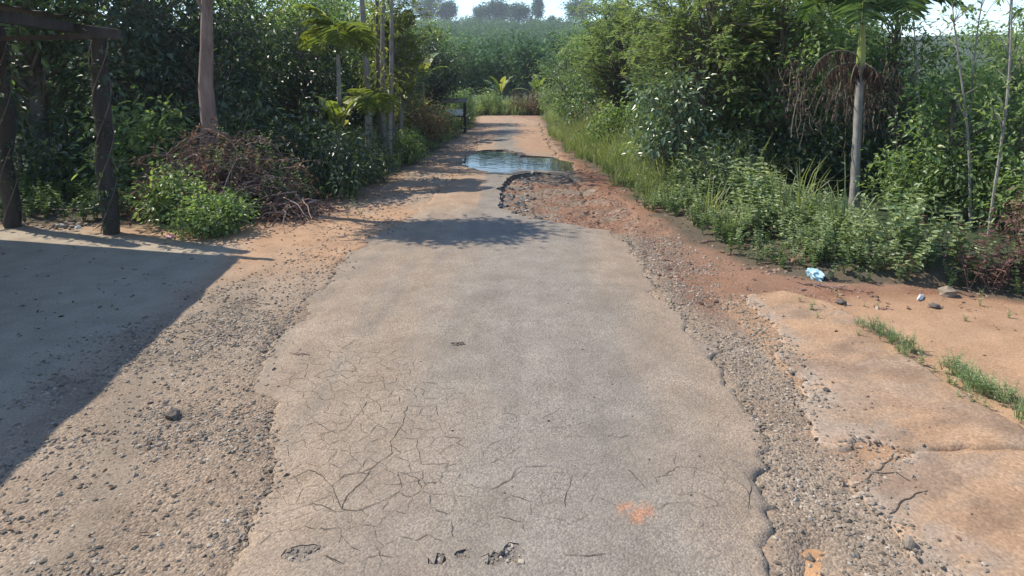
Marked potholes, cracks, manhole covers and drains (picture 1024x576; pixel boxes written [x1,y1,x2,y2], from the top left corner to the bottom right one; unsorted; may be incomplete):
pothole [494,171,637,234]
pothole [274,544,325,563]
crack [476,405,616,529]
pothole [463,150,576,176]
crack [629,423,753,528]
pothole [428,548,488,565]
crack [260,340,469,571]
crack [861,453,928,514]
pothole [464,542,525,567]
